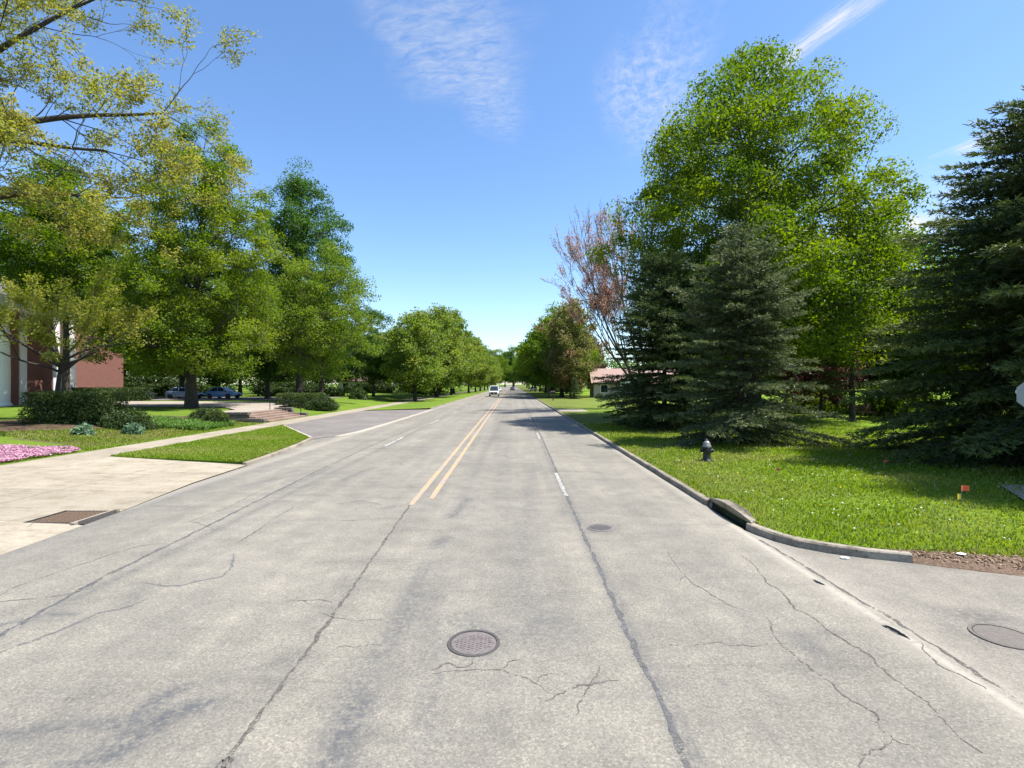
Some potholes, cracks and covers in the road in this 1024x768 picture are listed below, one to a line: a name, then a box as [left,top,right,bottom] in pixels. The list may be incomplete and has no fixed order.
manhole cover [447,630,500,657]
manhole cover [587,524,613,532]
drain grate [24,508,120,525]
crack [432,659,618,714]
crack [221,501,410,766]
manhole cover [967,623,1024,650]
crack [670,558,983,768]
